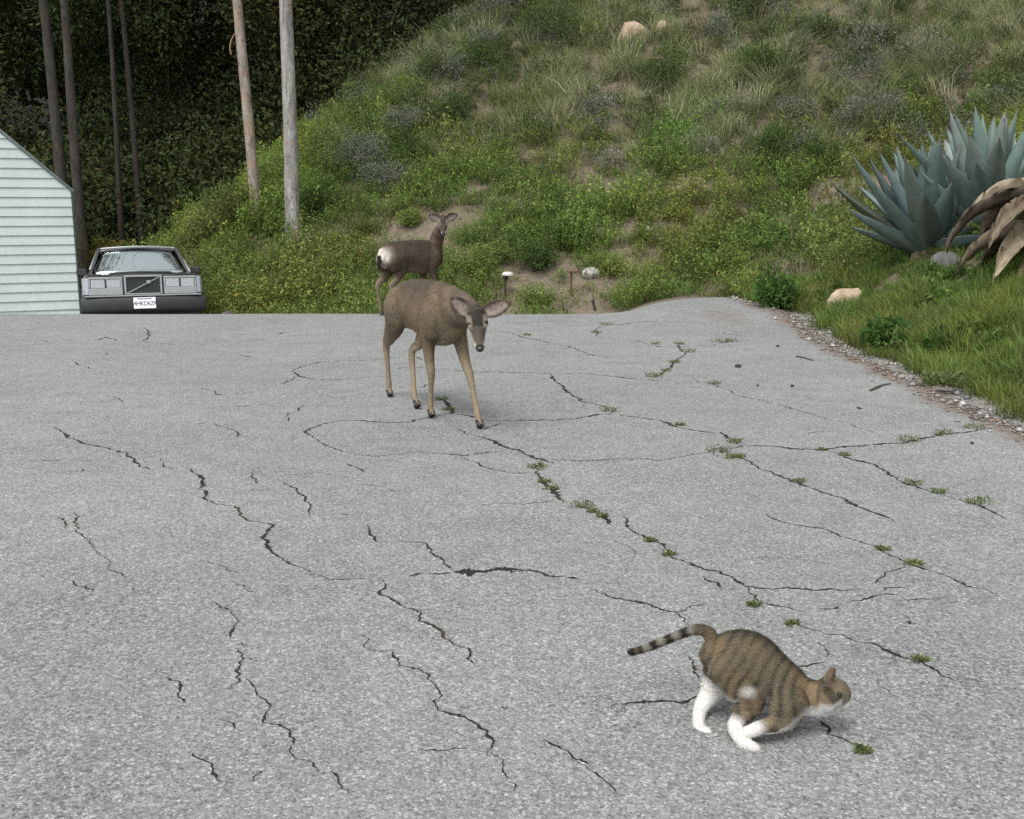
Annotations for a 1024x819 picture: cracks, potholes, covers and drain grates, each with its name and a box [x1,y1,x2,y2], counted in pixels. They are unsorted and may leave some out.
crack [40,321,1008,794]
